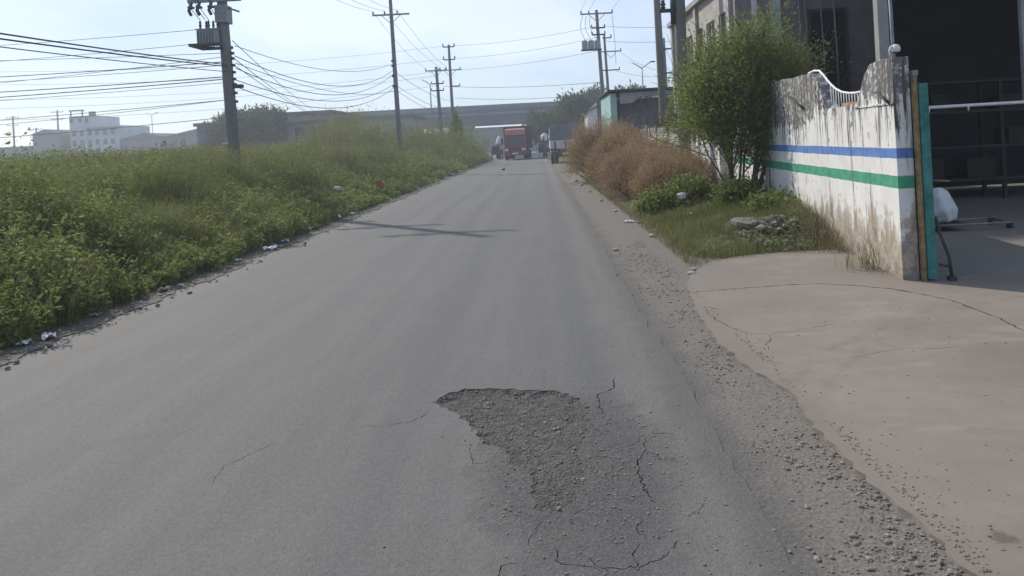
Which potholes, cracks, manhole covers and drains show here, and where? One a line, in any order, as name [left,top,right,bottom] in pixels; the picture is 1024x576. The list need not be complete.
pothole [383,368,727,576]
crack [528,379,703,571]
